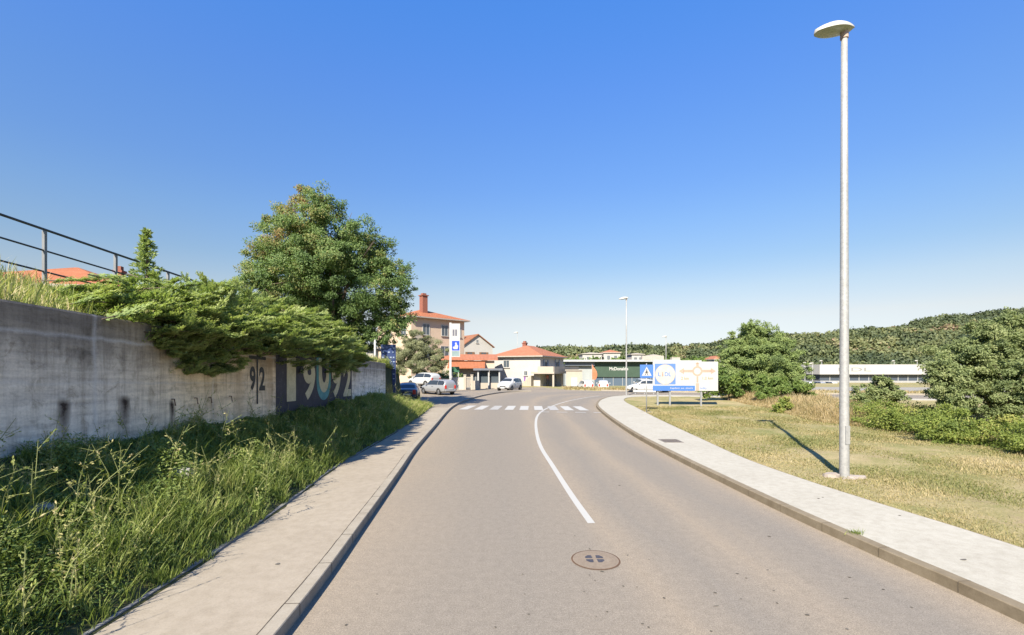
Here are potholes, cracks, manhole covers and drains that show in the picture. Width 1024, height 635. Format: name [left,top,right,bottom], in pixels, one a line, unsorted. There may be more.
manhole cover [571,550,620,570]
